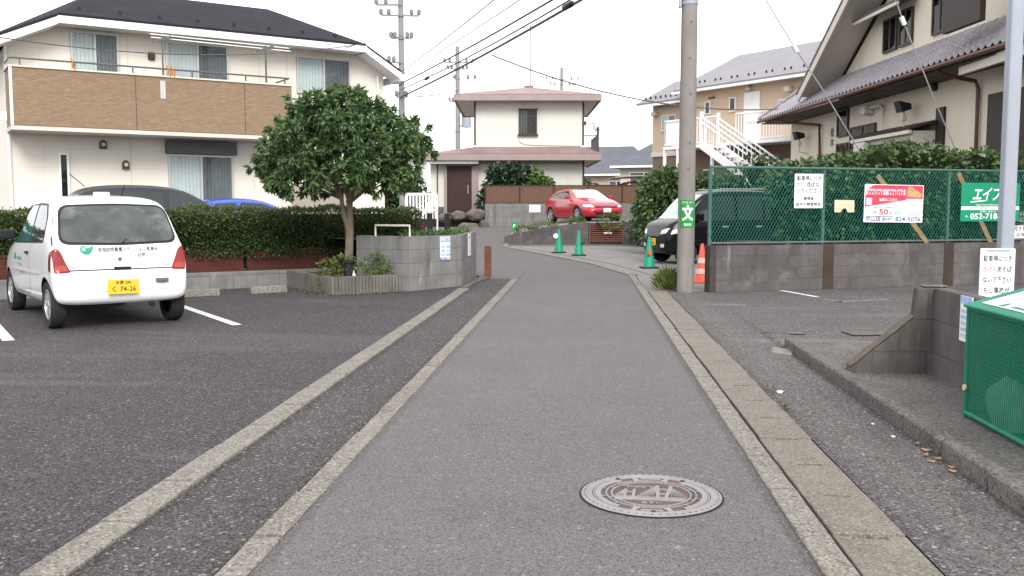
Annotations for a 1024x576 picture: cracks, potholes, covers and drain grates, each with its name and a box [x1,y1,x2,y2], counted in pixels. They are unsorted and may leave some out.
manhole cover [579,474,724,518]
